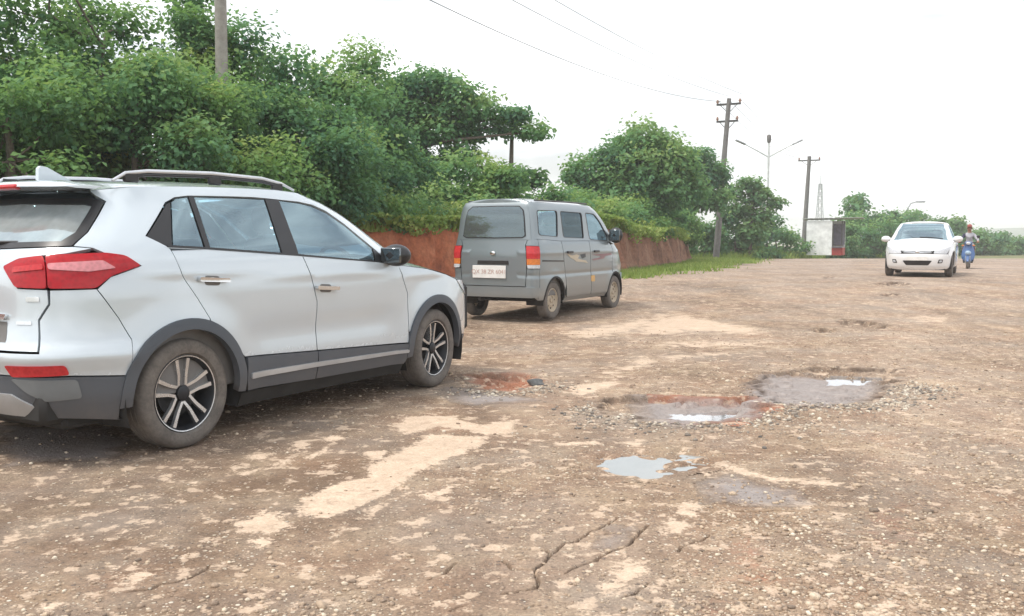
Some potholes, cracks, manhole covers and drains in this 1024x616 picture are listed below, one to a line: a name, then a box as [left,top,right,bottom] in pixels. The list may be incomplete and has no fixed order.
crack [406,506,811,616]
pothole [574,392,785,427]
crack [103,560,228,601]
pothole [823,318,901,331]
pothole [457,372,551,394]
pothole [573,446,730,484]
pothole [799,327,851,335]
pothole [737,366,919,407]
